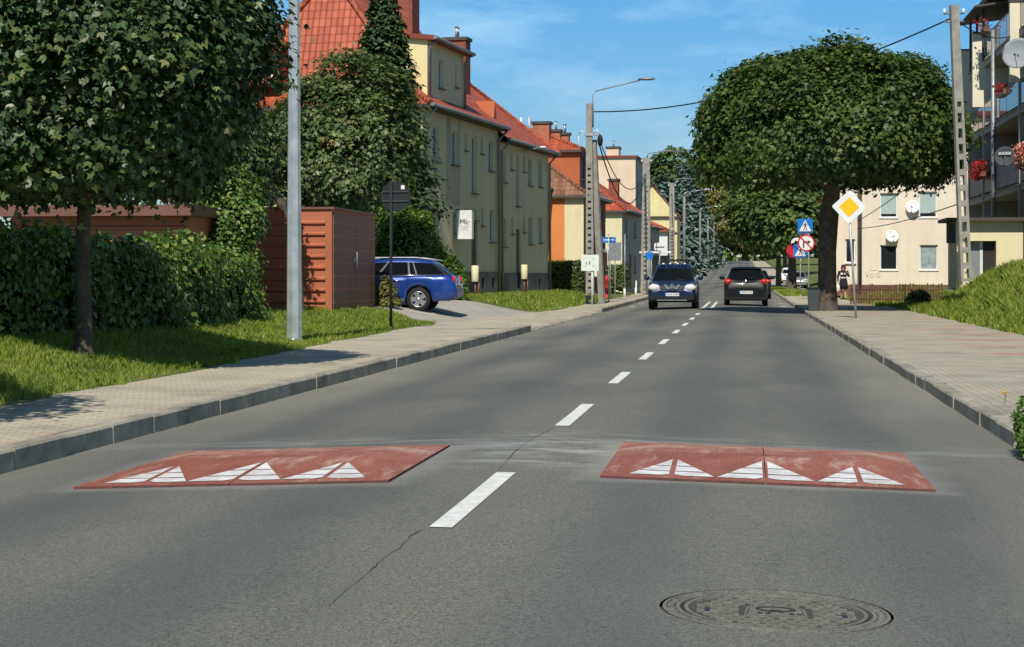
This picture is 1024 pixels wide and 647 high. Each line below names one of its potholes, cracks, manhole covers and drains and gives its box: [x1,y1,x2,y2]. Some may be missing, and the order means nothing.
manhole cover [660,590,893,634]
crack [333,530,421,603]
